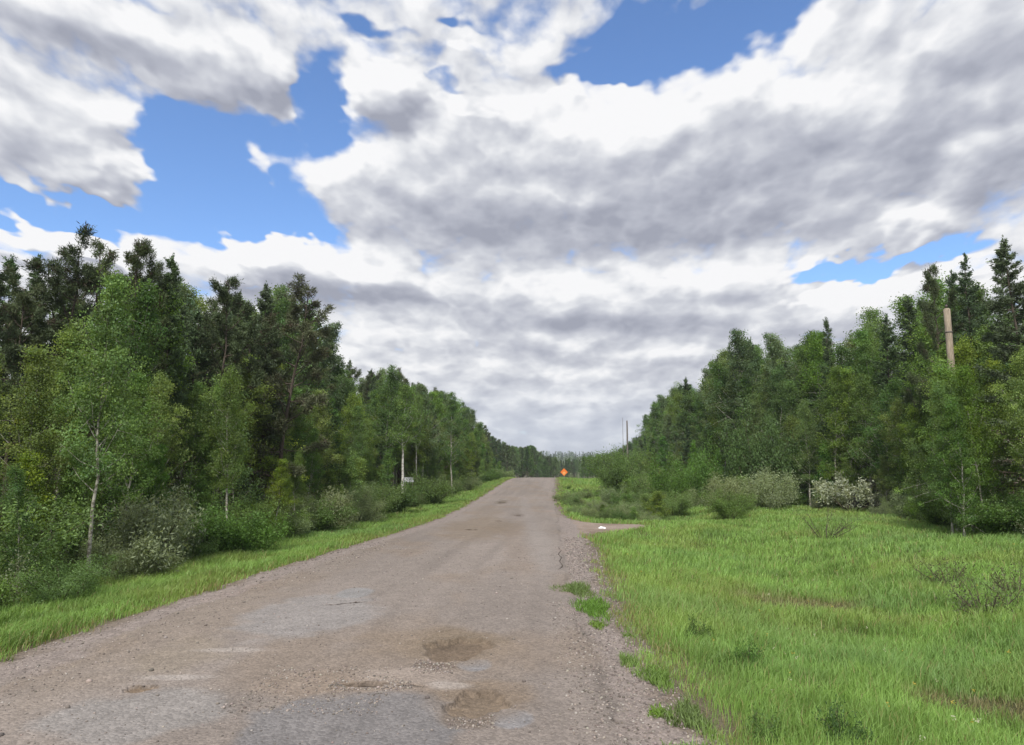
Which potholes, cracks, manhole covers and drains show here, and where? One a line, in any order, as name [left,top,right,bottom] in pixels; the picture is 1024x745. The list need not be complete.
pothole [418,635,501,664]
pothole [116,683,166,695]
pothole [436,688,518,721]
crack [556,547,566,569]
